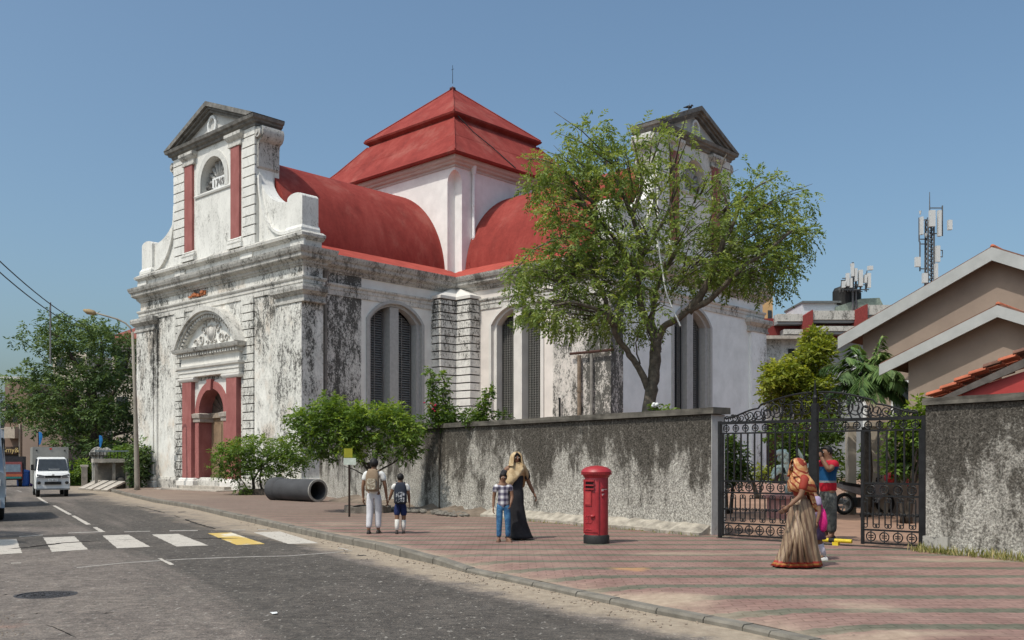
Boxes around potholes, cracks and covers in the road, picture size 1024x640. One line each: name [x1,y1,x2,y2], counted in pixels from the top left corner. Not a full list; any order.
manhole cover [13,591,78,599]
